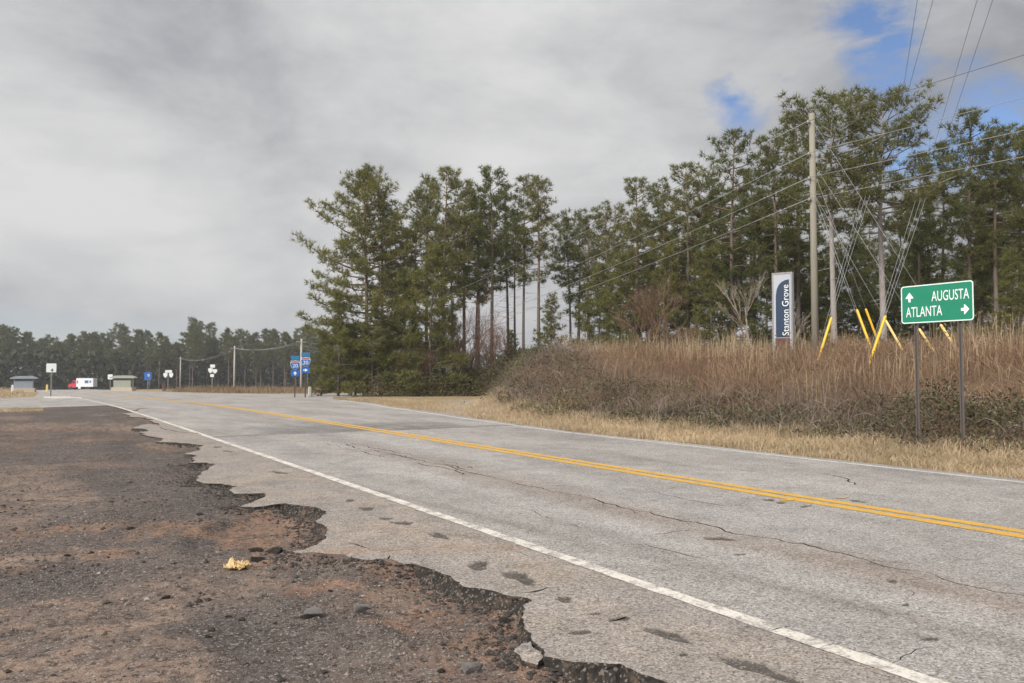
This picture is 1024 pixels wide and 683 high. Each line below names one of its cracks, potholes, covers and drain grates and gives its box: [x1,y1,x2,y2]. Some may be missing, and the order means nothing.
pothole [345,563,532,662]
pothole [531,656,668,683]
pothole [192,481,236,497]
pothole [233,493,266,502]
pothole [143,442,203,454]
pothole [157,462,214,477]
crack [328,442,1020,595]
